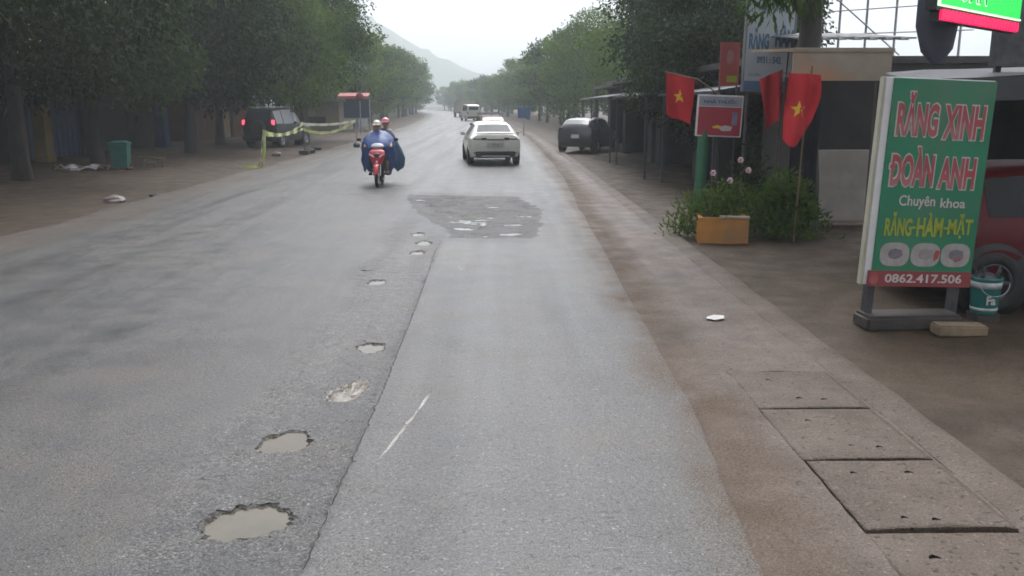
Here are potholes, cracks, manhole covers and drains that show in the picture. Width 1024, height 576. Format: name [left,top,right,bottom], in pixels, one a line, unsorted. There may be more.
pothole [197,500,311,544]
pothole [353,340,386,355]
pothole [242,429,316,454]
pothole [321,377,372,403]
